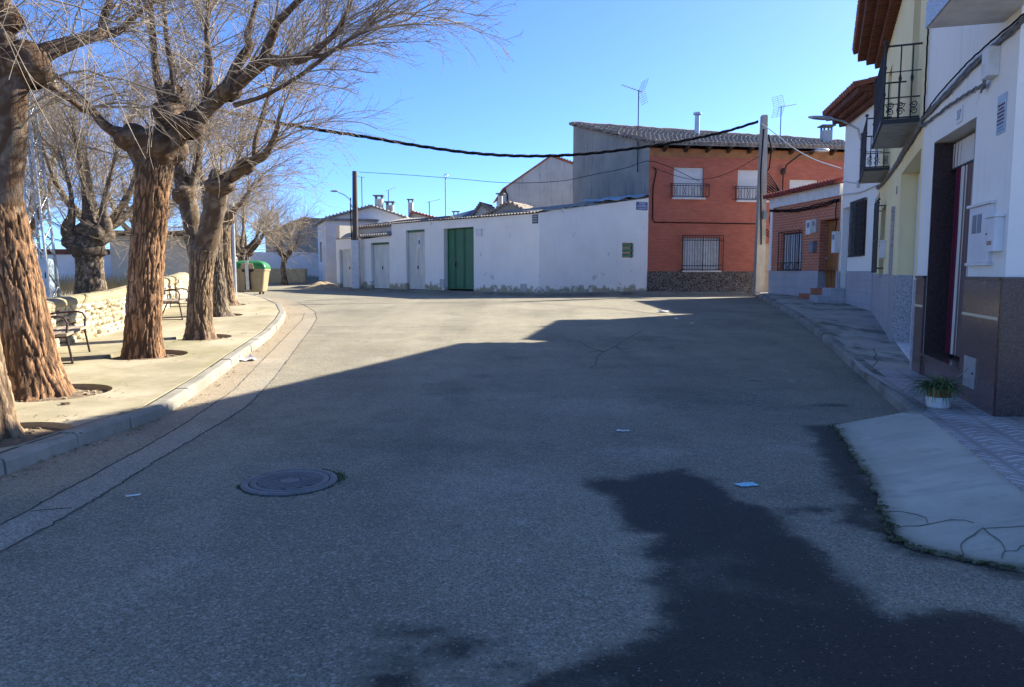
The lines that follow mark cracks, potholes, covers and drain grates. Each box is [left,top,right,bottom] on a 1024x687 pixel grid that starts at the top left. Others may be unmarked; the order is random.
manhole cover [236,468,348,497]
crack [887,511,1024,558]
